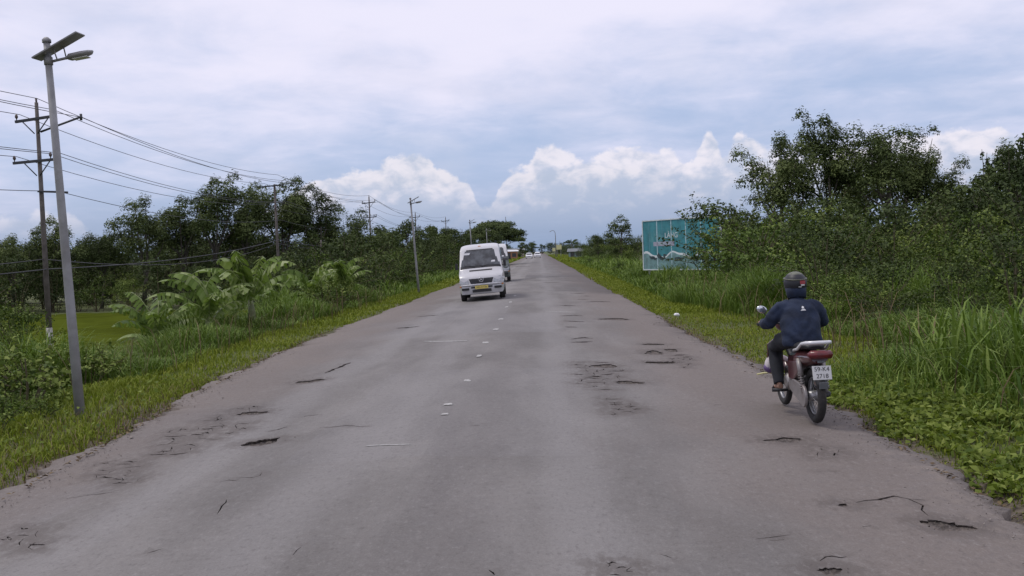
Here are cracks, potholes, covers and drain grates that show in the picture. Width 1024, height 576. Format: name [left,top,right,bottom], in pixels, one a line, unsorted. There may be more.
crack [73,406,255,498]
pothole [920,520,977,532]
pothole [817,567,843,576]
pothole [241,437,281,446]
crack [859,496,926,514]
